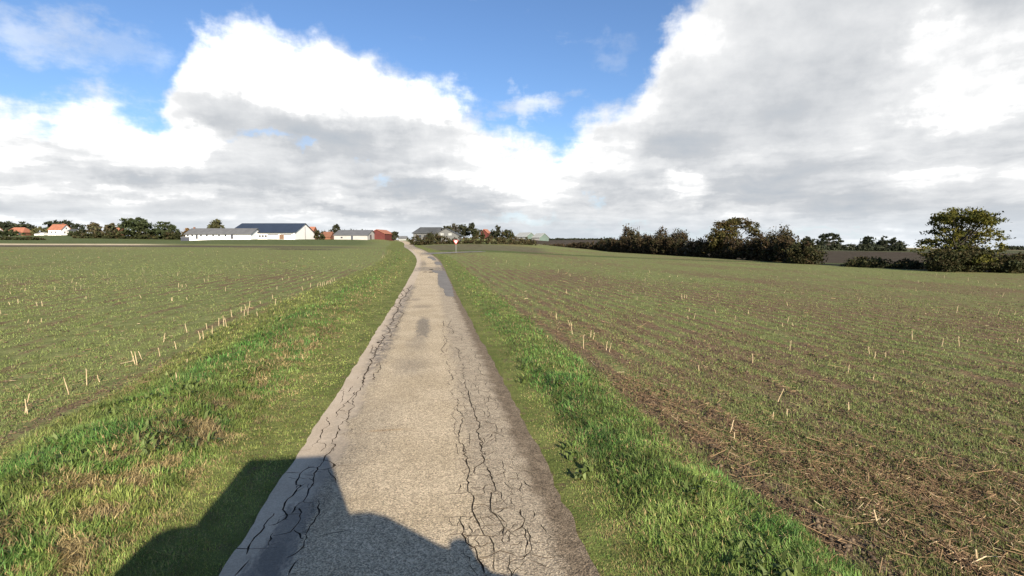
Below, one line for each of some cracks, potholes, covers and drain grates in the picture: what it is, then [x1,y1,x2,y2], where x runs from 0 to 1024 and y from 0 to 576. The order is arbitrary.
crack [235,285,412,576]
crack [437,319,553,576]
